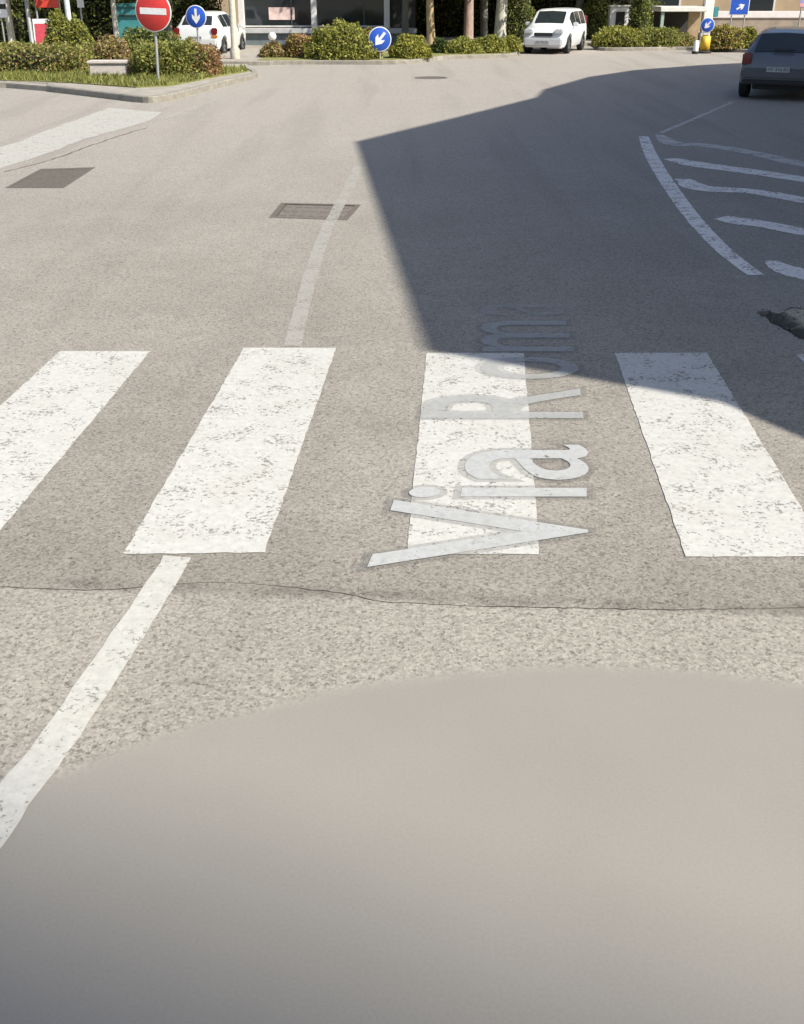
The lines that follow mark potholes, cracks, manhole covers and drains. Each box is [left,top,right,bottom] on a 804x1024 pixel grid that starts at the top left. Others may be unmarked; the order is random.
manhole cover [269,203,361,220]
crack [0,582,804,611]
pothole [757,305,804,340]
